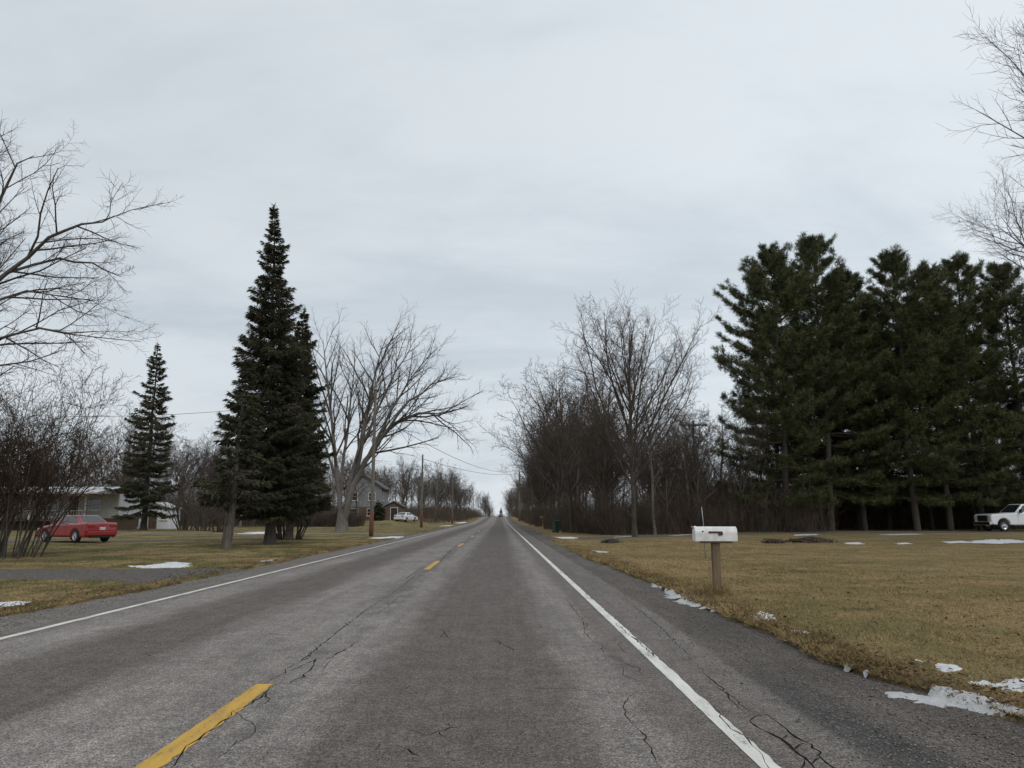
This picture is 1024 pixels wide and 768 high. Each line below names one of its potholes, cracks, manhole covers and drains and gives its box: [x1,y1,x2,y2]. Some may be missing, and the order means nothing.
crack [704,673,834,768]
crack [534,688,661,767]
crack [171,569,420,768]
crack [376,722,463,756]
crack [558,599,654,679]
